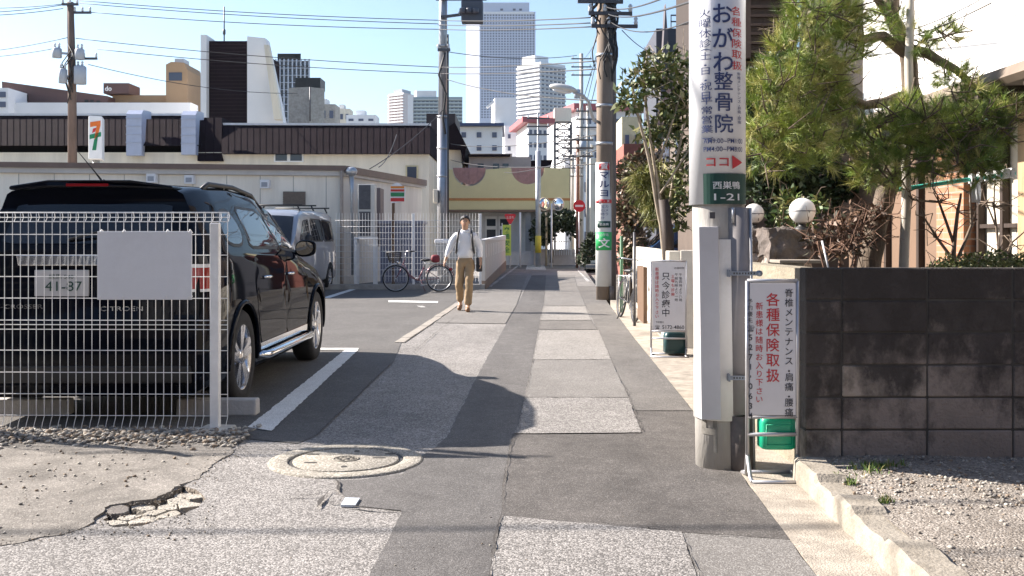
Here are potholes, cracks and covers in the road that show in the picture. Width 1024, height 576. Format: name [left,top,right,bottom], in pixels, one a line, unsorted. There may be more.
pothole [103,485,206,527]
manhole cover [267,444,423,479]
